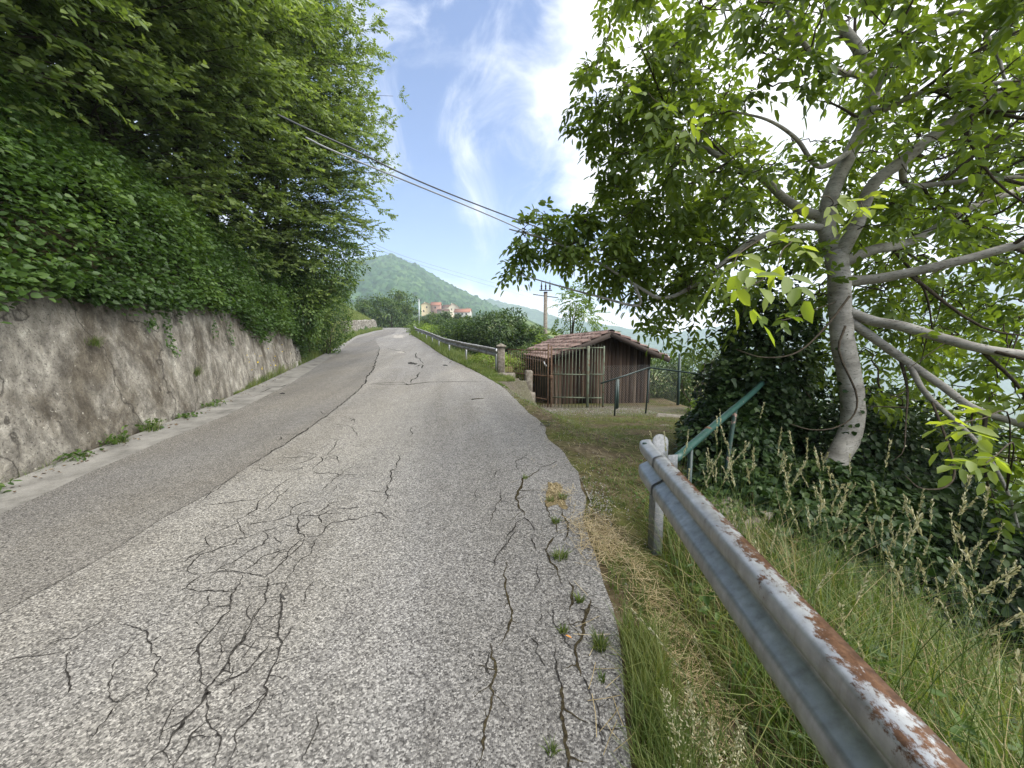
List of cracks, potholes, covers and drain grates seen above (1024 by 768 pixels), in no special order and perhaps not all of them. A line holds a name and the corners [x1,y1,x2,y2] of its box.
crack [470,454,620,767]
crack [1,412,400,768]
